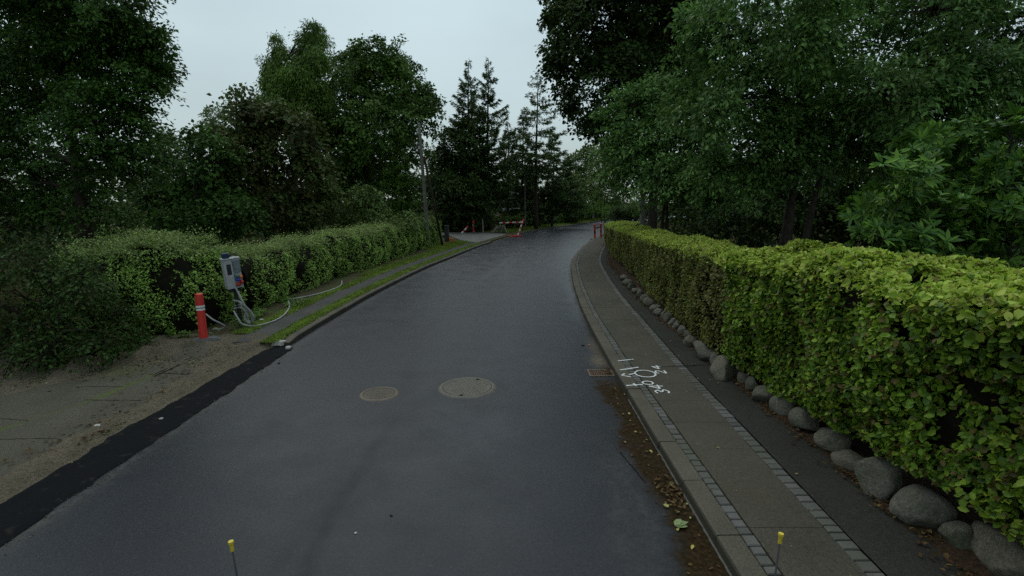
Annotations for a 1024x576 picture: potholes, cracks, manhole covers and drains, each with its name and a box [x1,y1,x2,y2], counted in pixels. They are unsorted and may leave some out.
drain grate [587,369,615,377]
manhole cover [438,377,496,399]
manhole cover [359,387,399,401]
